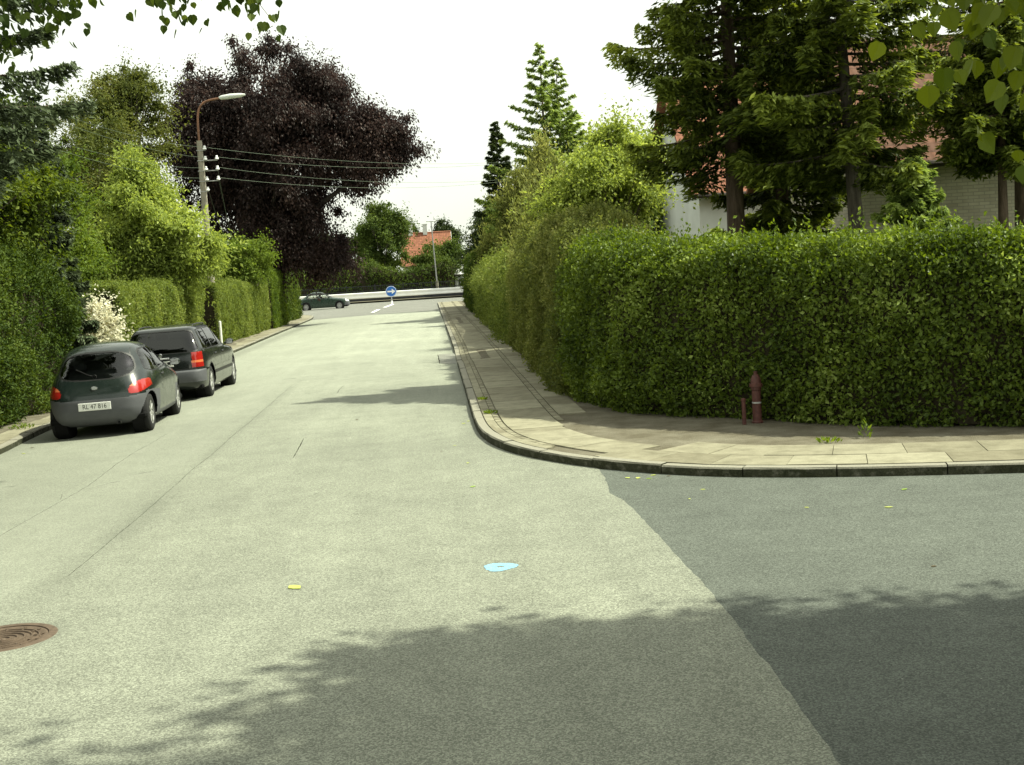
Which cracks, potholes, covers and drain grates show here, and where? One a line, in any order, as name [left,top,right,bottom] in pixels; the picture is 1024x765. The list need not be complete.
manhole cover [0,623,58,652]
